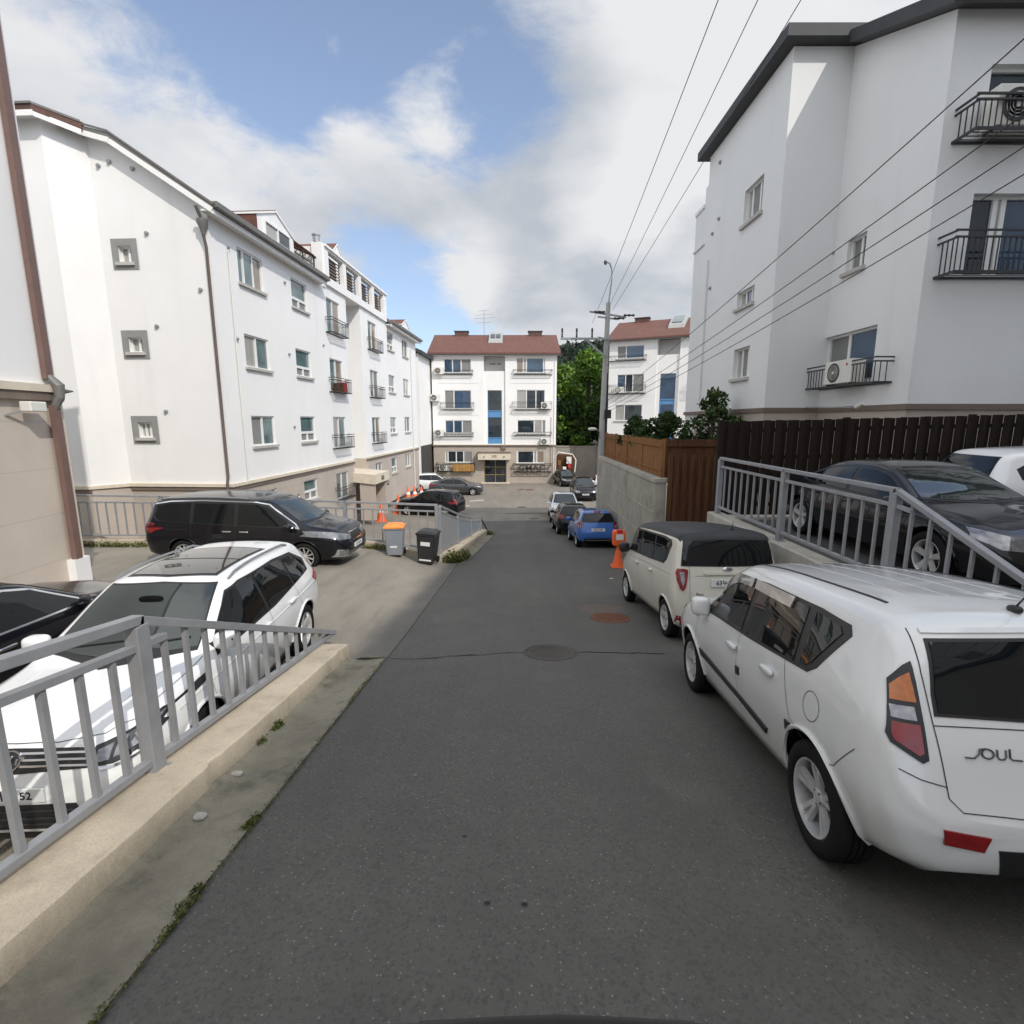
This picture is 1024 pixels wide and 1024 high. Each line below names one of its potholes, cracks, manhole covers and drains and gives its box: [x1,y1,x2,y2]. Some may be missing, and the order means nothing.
manhole cover [590,613,631,623]
manhole cover [524,644,577,661]
